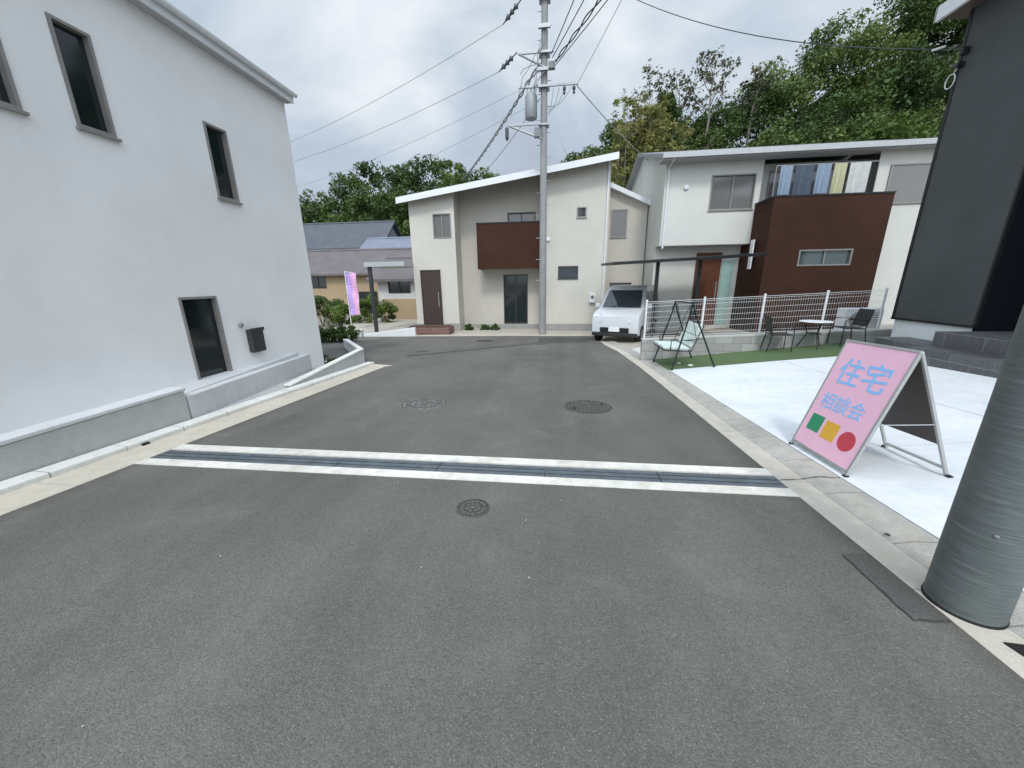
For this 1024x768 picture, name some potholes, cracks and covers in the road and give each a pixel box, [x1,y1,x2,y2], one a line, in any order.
manhole cover [400,397,448,411]
utility cover [456,499,490,518]
manhole cover [564,400,613,414]
